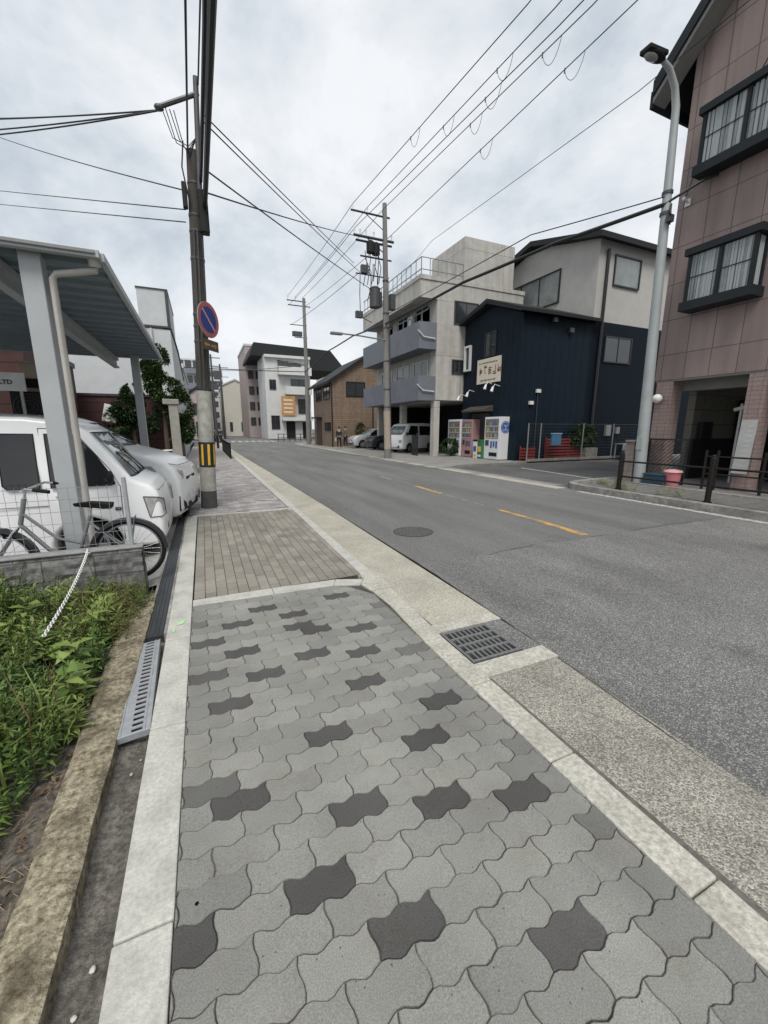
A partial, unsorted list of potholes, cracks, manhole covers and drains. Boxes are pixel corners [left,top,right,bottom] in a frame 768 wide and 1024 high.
drain grate [117,639,161,745]
manhole cover [393,527,433,537]
drain grate [440,623,521,664]
